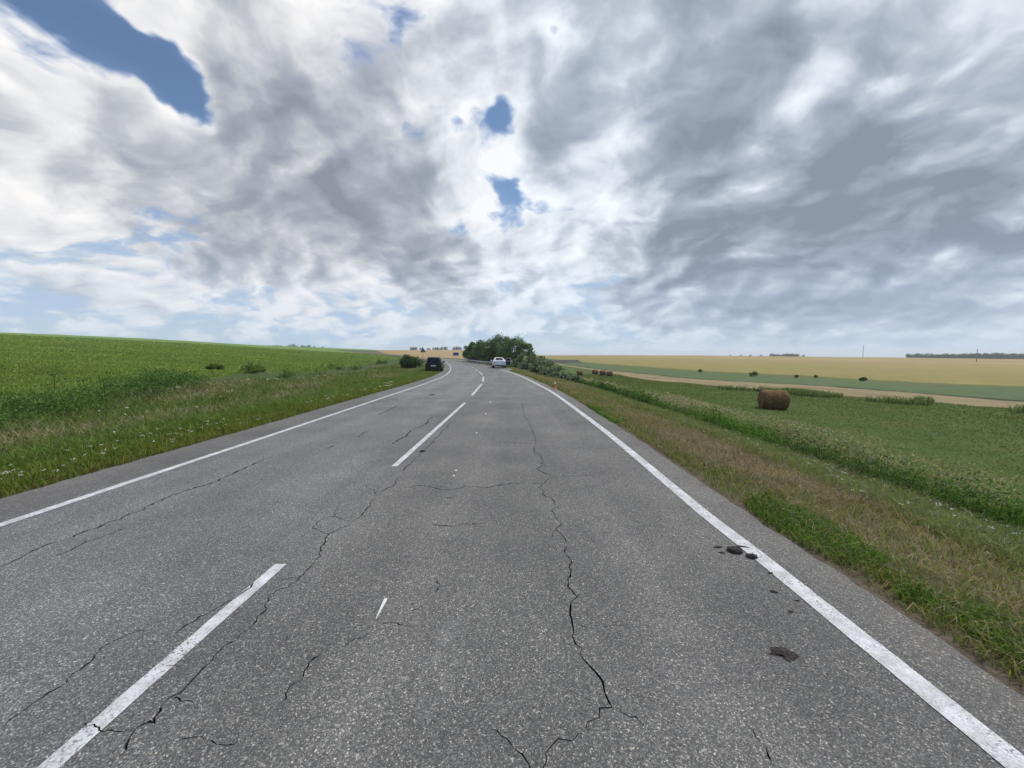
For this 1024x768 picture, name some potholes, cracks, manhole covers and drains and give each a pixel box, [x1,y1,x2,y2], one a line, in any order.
crack [3,457,272,566]
crack [9,480,397,762]
crack [497,432,639,767]
